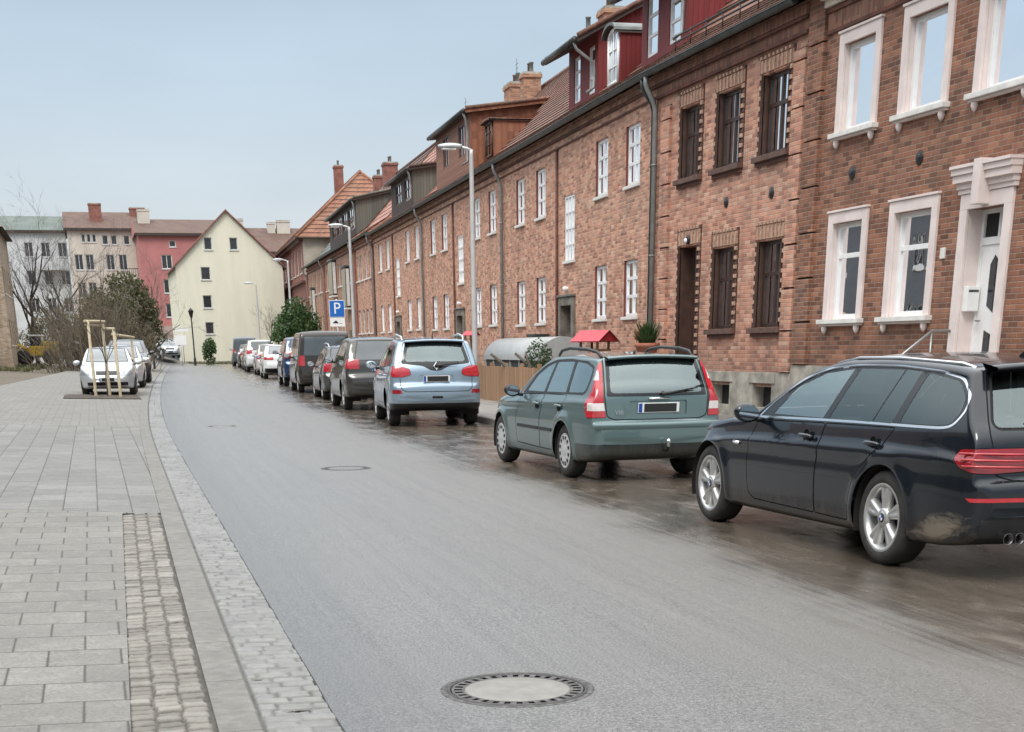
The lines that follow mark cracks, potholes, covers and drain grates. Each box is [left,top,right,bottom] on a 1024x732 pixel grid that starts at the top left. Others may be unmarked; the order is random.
manhole cover [441,672,594,708]
